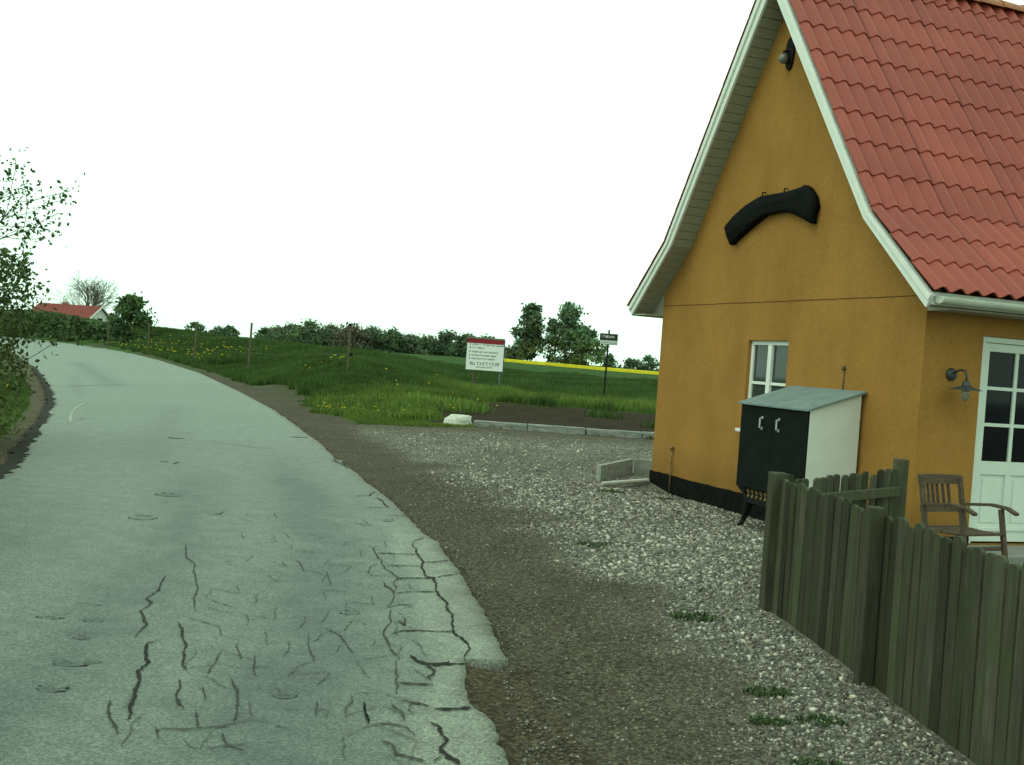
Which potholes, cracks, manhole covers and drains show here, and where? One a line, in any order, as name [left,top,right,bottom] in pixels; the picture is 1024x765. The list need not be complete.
crack [106,492,471,765]
